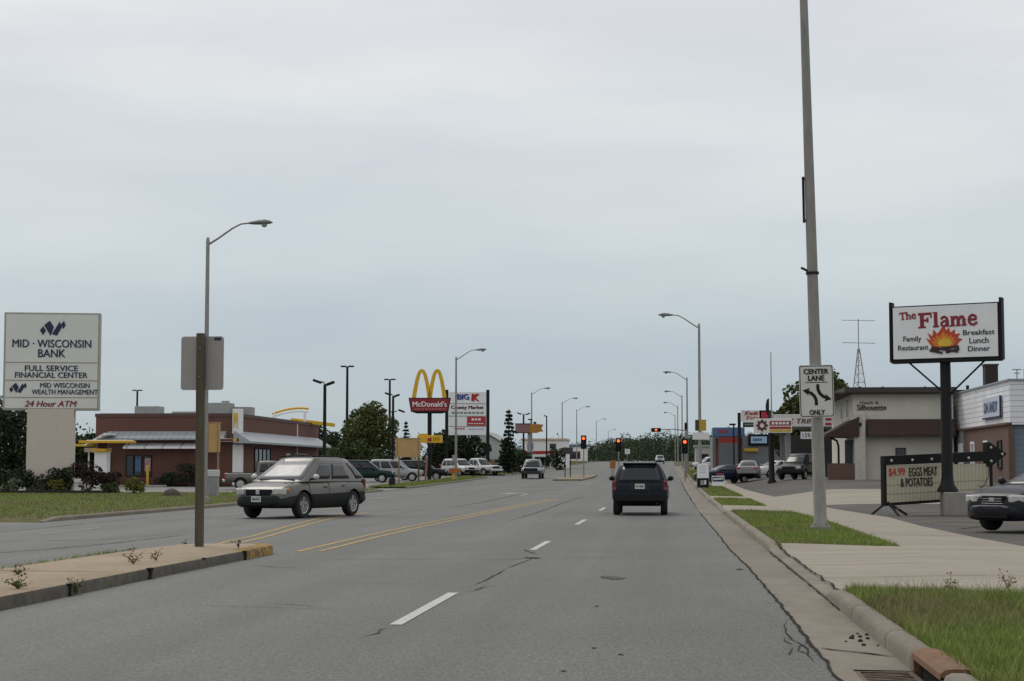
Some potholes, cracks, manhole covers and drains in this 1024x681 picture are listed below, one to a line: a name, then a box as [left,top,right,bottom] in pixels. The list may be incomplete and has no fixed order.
crack [680,479,844,681]
drain grate [855,648,974,681]
